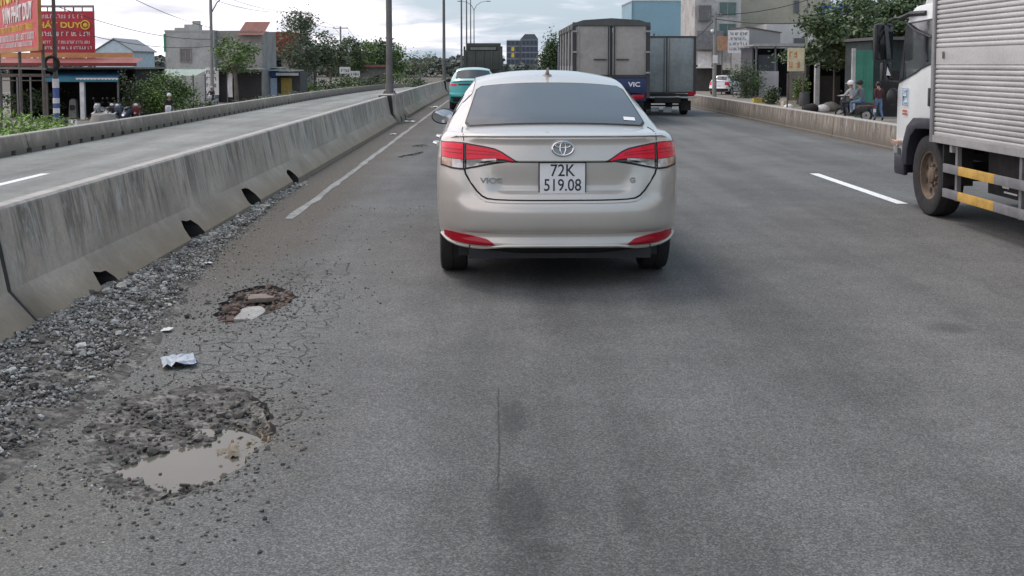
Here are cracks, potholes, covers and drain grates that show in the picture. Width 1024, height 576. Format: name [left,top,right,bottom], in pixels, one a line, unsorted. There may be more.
crack [166,260,349,388]
pothole [213,284,297,324]
pothole [82,383,277,503]
